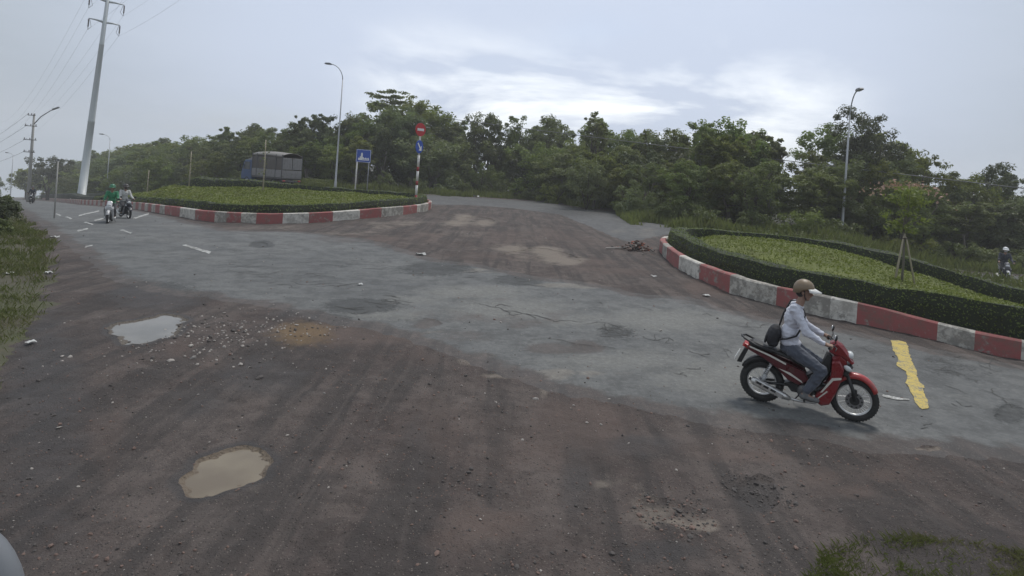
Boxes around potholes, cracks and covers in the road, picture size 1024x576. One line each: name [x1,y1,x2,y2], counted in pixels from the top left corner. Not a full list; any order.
pothole [107,313,189,345]
crack [936,355,1013,407]
crack [474,302,732,376]
pothole [178,445,274,498]
